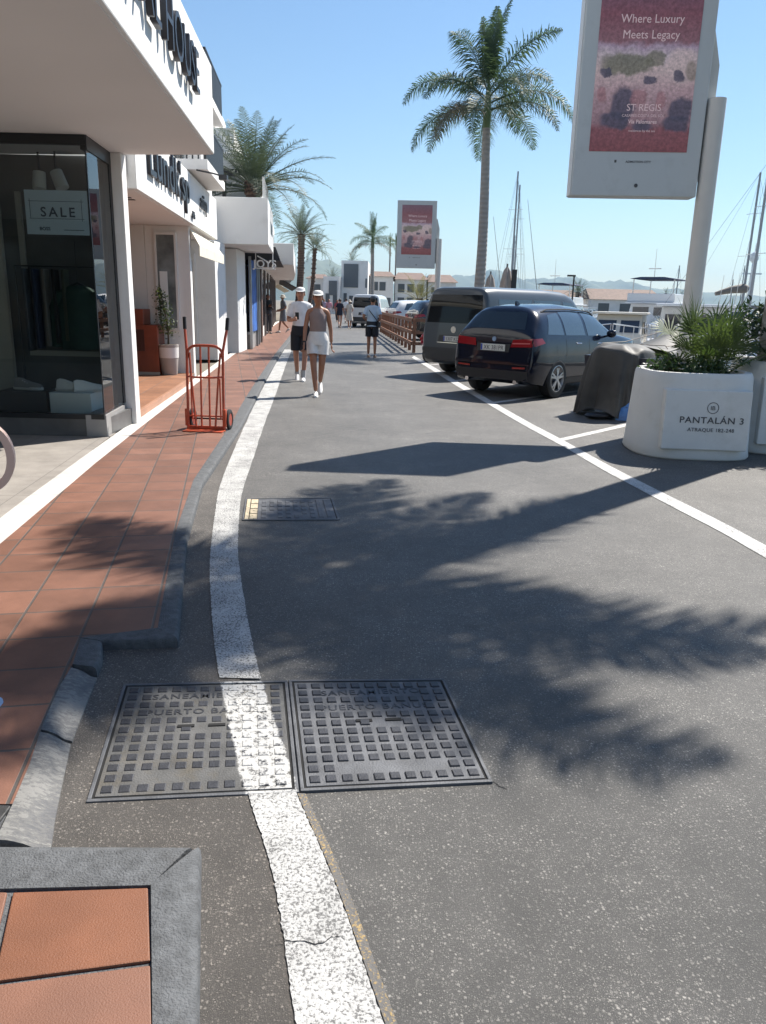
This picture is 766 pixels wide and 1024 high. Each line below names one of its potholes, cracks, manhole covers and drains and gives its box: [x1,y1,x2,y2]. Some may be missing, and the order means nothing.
manhole cover [242,498,340,521]
manhole cover [86,680,299,803]
crack [271,936,338,945]
manhole cover [289,678,493,793]
